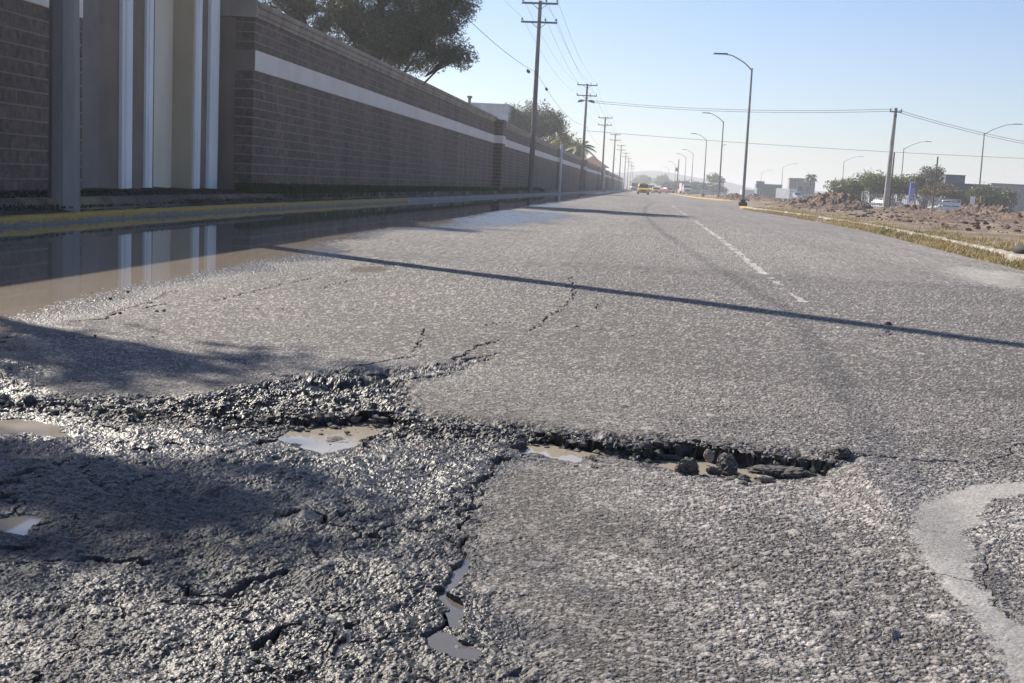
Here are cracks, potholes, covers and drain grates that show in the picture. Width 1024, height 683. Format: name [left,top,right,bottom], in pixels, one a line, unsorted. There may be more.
pothole [634,440,842,483]
pothole [0,415,85,438]
pothole [0,510,51,536]
crack [0,328,531,683]
crack [539,276,599,327]
pothole [261,407,402,456]
crack [979,500,1016,621]
